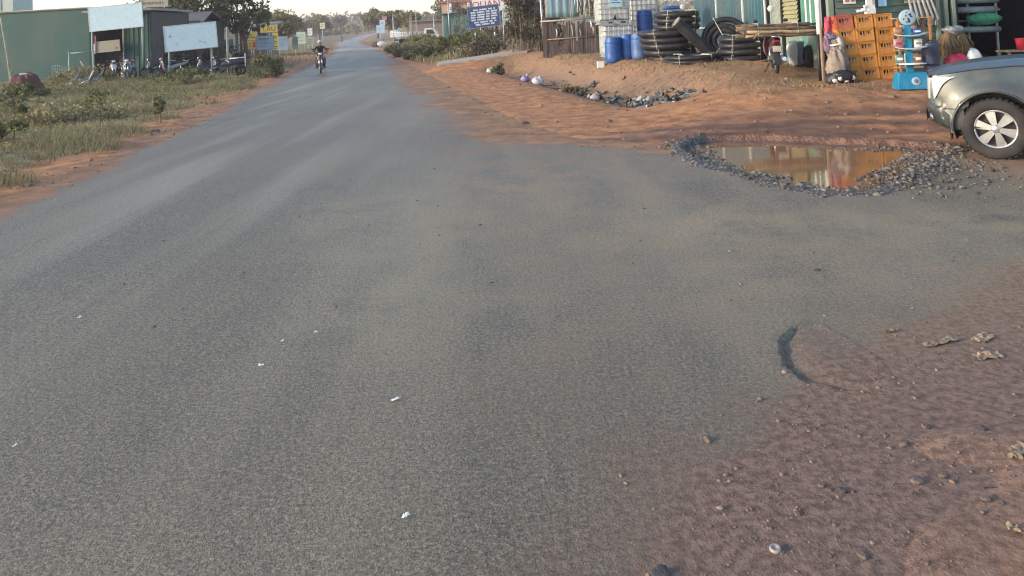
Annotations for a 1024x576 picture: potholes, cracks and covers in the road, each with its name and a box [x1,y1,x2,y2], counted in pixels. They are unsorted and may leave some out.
pothole [672,134,971,196]
